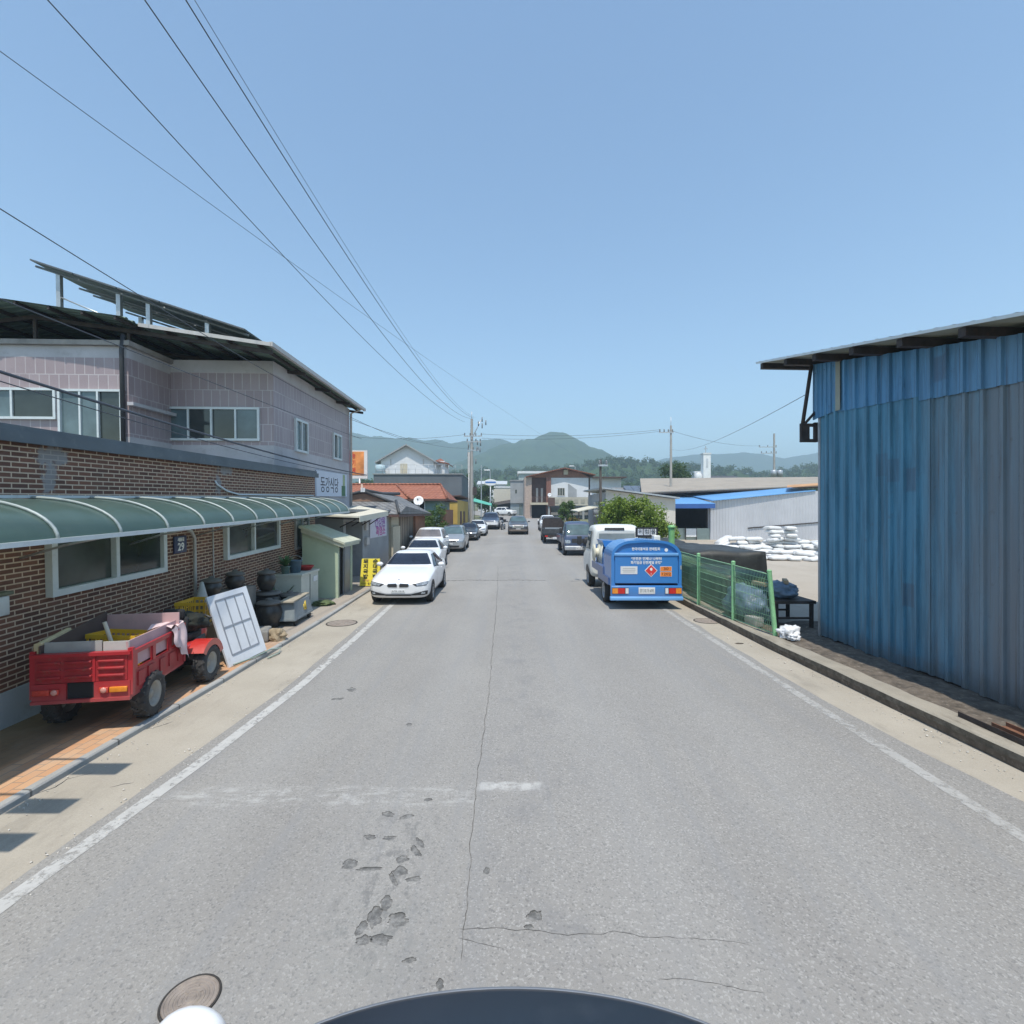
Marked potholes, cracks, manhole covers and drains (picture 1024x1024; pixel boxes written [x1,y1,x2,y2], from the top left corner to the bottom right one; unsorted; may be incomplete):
pothole [526,910,542,922]
pothole [370,933,393,946]
pothole [387,912,409,928]
pothole [355,934,373,945]
manhole cover [157,973,222,1023]
pothole [380,895,393,911]
crack [664,978,763,993]
crack [460,927,748,948]
pothole [367,906,383,929]
pothole [391,865,408,876]
pothole [342,859,358,869]
pothole [354,920,368,936]
